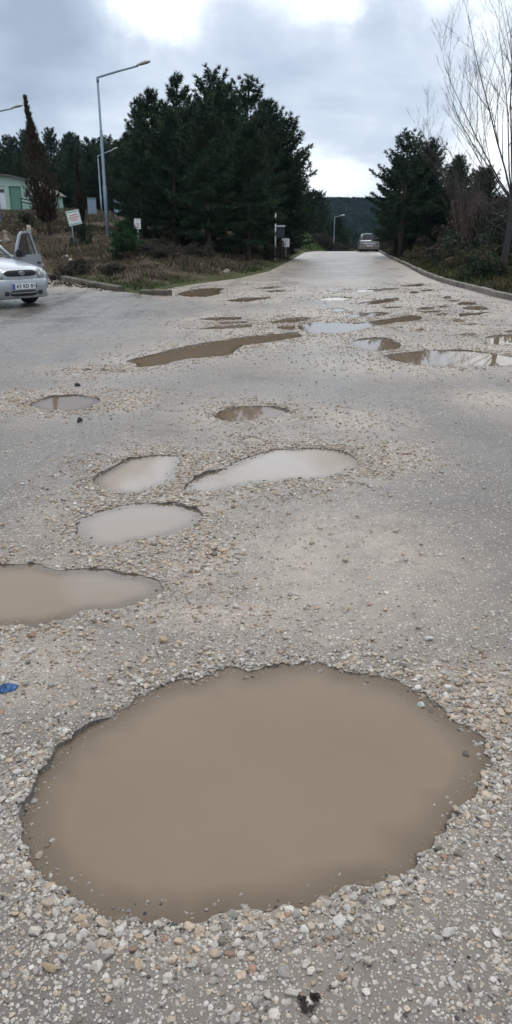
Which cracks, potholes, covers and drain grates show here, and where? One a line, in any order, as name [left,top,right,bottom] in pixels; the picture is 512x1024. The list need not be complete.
pothole [0,563,164,627]
pothole [485,334,512,345]
pothole [183,448,358,492]
pothole [349,337,401,351]
pothole [18,660,493,924]
pothole [383,349,512,366]
pothole [297,315,423,334]
pothole [92,455,182,492]
pothole [75,502,203,546]
pothole [214,405,290,422]
pothole [126,332,302,367]
pothole [177,288,224,297]
